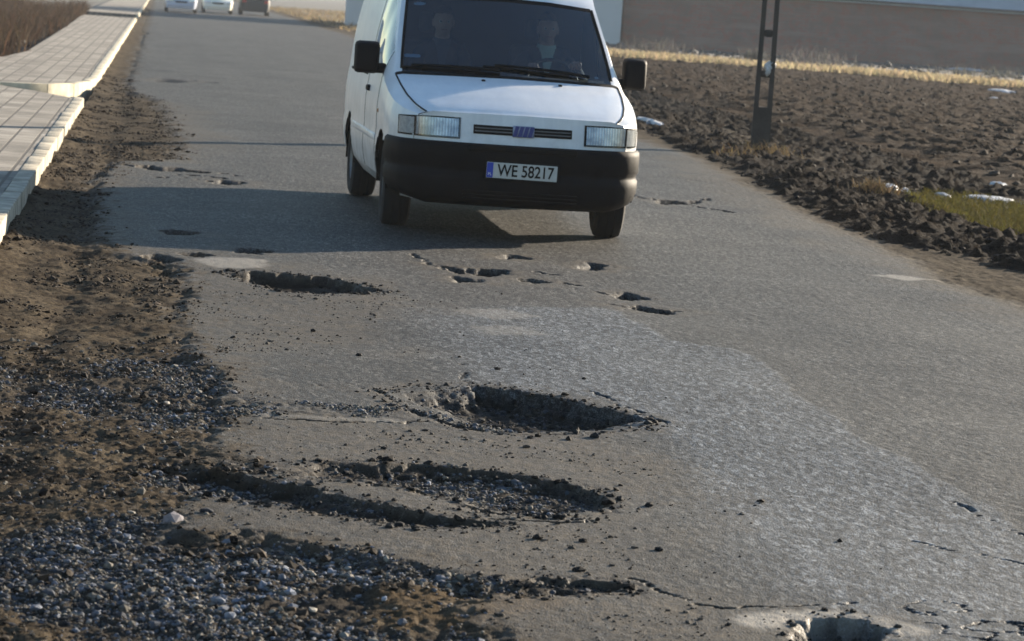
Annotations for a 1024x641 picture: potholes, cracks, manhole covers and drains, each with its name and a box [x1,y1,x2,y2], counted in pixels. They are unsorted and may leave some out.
crack [622,576,860,610]
pothole [446,575,639,600]
pothole [384,385,647,436]
pothole [448,275,489,283]
pothole [605,291,656,302]
pothole [144,466,509,530]
crack [905,539,1024,565]
pothole [429,264,516,277]
pothole [252,460,613,520]
crack [243,415,435,425]
pothole [572,261,614,271]
crack [898,599,1024,641]
